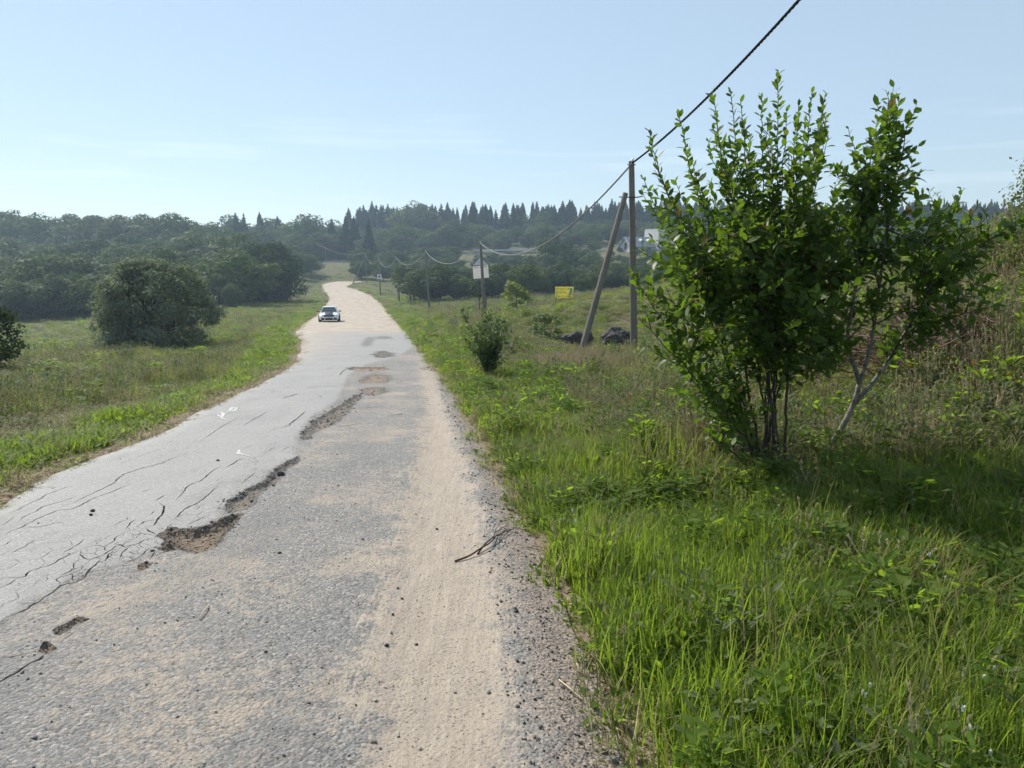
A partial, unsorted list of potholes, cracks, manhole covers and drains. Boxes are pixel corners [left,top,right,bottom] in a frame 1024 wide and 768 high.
pothole [217,456,305,514]
pothole [359,387,390,396]
pothole [299,393,363,440]
pothole [150,513,244,554]
pothole [52,617,90,635]
pothole [358,374,397,383]
crack [0,387,309,715]
pothole [34,641,57,654]
